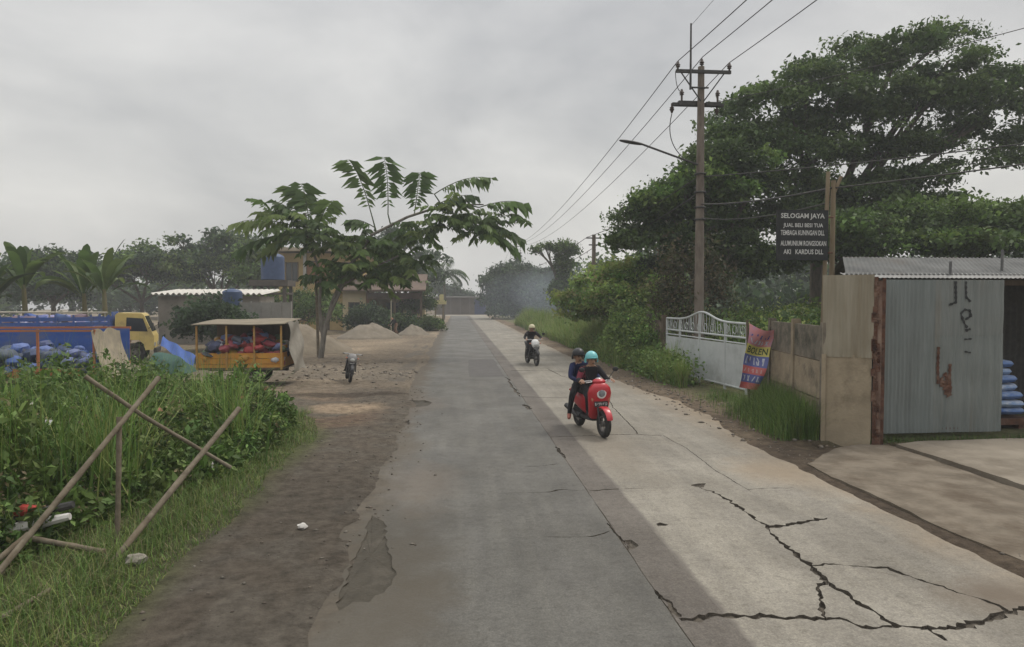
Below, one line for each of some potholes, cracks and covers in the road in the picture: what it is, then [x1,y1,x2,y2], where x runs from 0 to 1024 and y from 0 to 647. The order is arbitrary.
pothole [335,516,397,611]
crack [663,435,1024,641]
